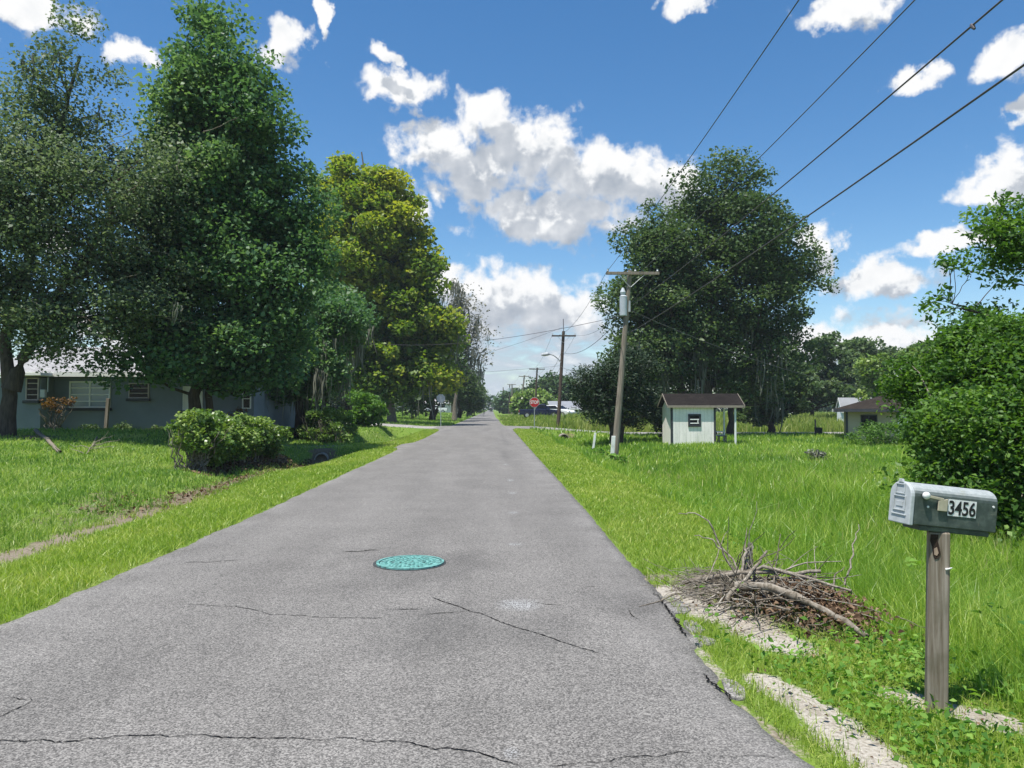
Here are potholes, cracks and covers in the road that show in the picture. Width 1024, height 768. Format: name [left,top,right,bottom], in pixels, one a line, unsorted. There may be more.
crack [548,751,693,768]
manhole cover [373,555,446,571]
crack [653,592,686,635]
crack [9,734,518,765]
crack [424,598,600,654]
crack [703,673,731,700]
